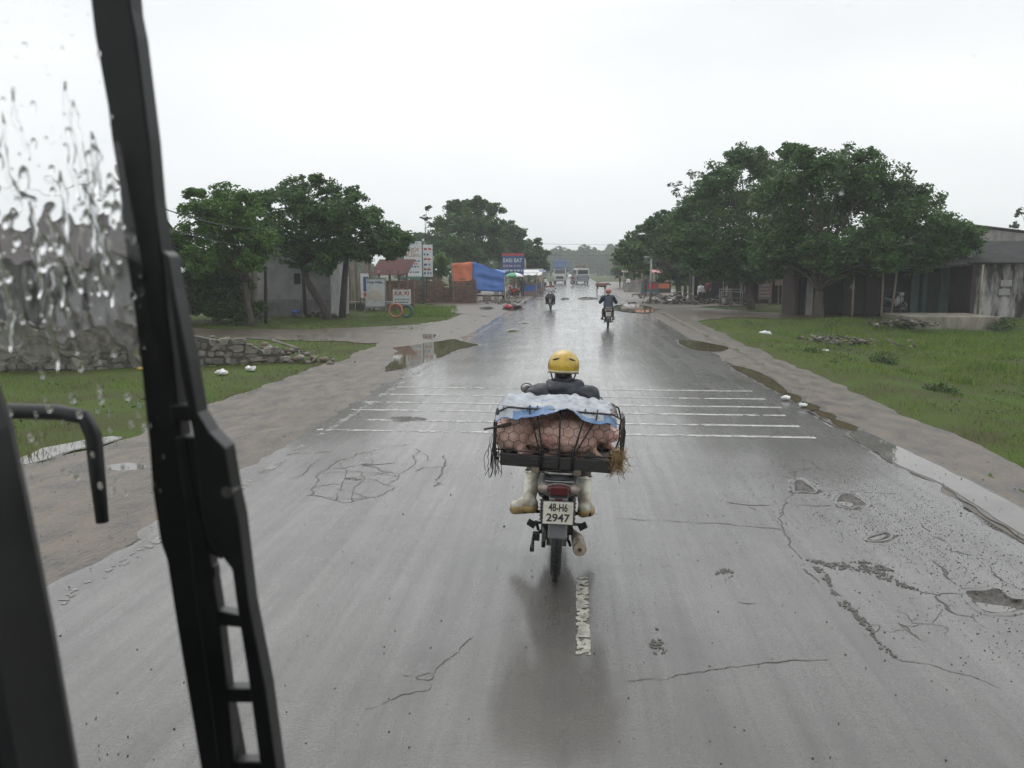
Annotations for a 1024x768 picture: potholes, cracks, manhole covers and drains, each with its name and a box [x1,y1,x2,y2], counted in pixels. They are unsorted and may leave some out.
pothole [958,587,1024,616]
pothole [832,492,870,509]
crack [286,444,447,503]
crack [627,659,828,681]
crack [875,522,990,640]
crack [366,637,473,709]
pothole [791,479,818,493]
pothole [864,531,893,541]
crack [624,461,830,581]
